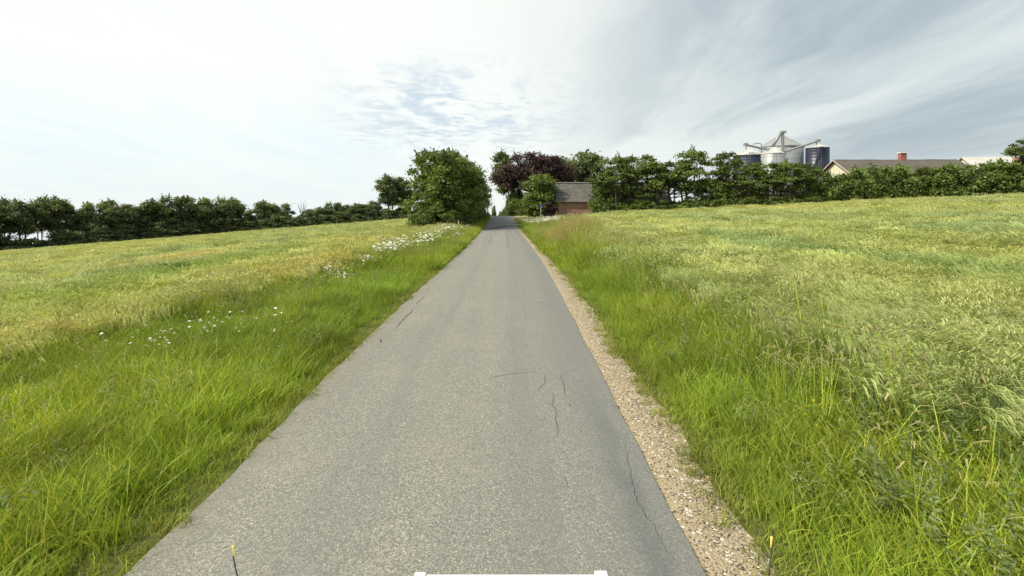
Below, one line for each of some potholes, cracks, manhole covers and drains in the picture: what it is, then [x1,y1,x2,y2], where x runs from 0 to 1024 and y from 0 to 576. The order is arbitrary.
crack [625,440,674,559]
crack [486,372,571,485]
